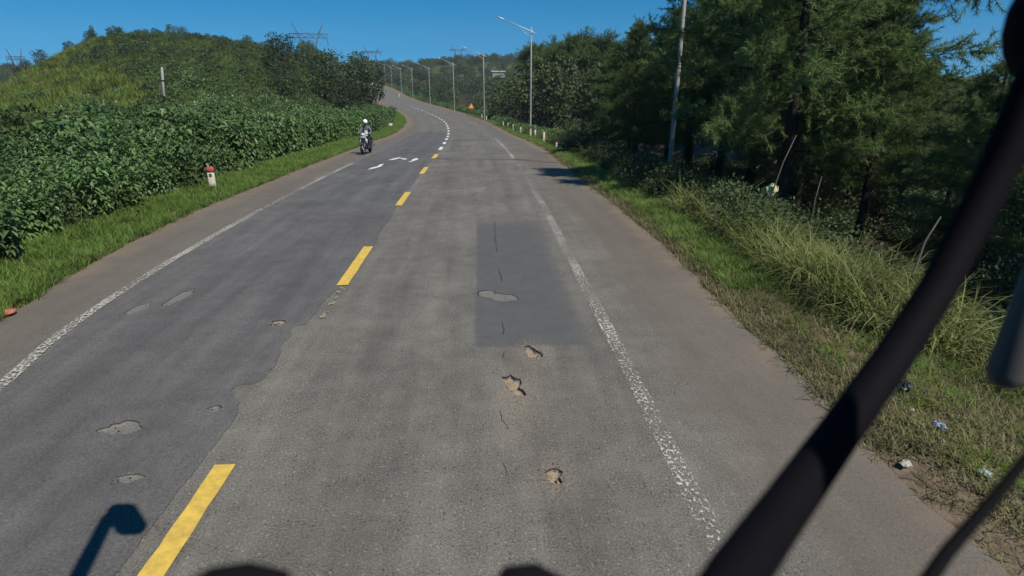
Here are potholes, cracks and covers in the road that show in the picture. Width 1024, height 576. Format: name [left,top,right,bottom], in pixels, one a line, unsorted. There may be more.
pothole [522,343,547,360]
pothole [493,372,527,400]
pothole [538,463,570,487]
pothole [87,418,143,436]
pothole [111,472,146,484]
